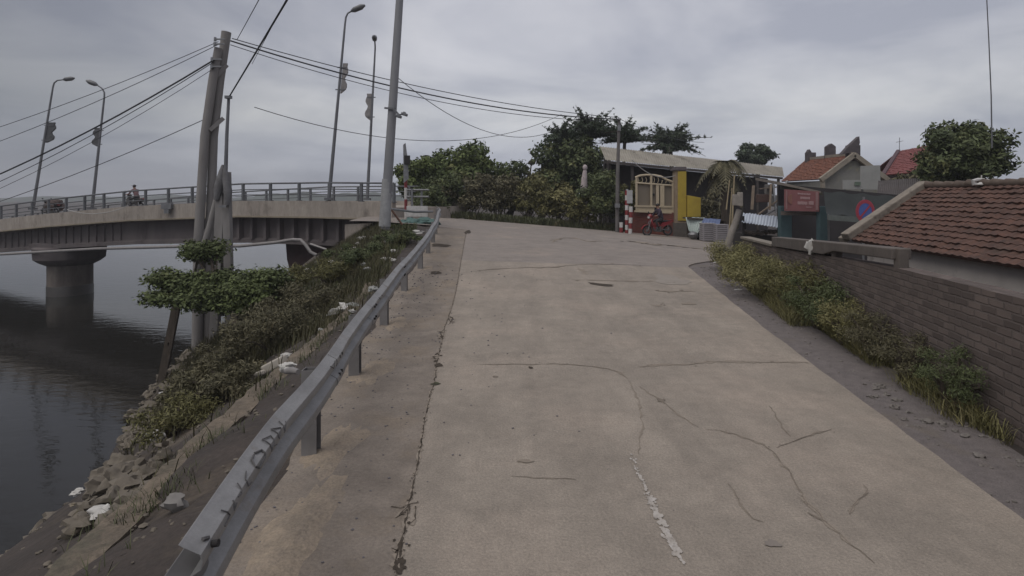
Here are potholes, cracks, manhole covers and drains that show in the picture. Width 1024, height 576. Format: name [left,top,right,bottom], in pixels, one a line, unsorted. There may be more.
crack [491,362,875,563]
crack [477,263,651,282]
